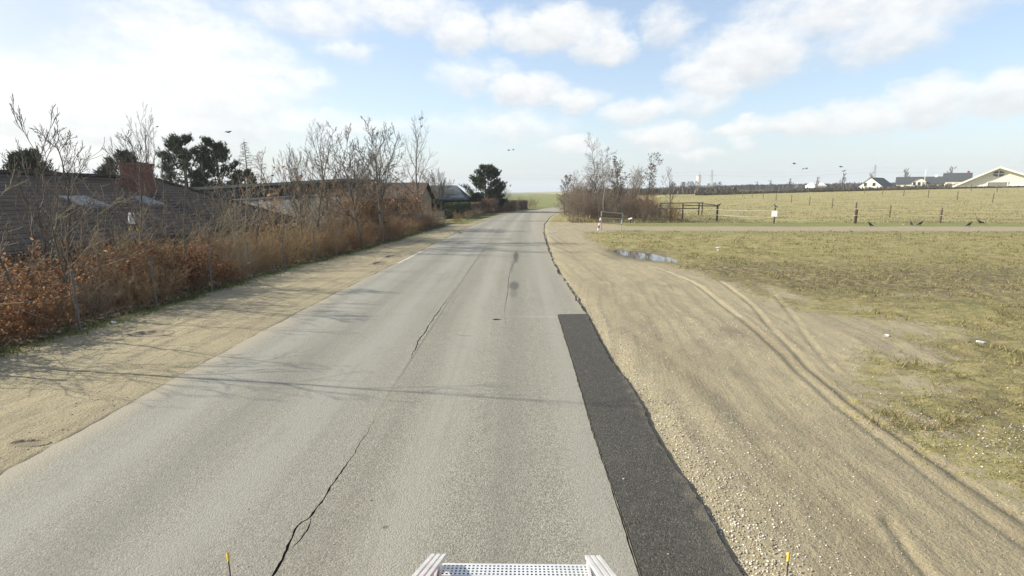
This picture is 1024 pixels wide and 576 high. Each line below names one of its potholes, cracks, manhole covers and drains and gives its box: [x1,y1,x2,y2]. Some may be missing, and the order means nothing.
crack [272,424,372,576]
